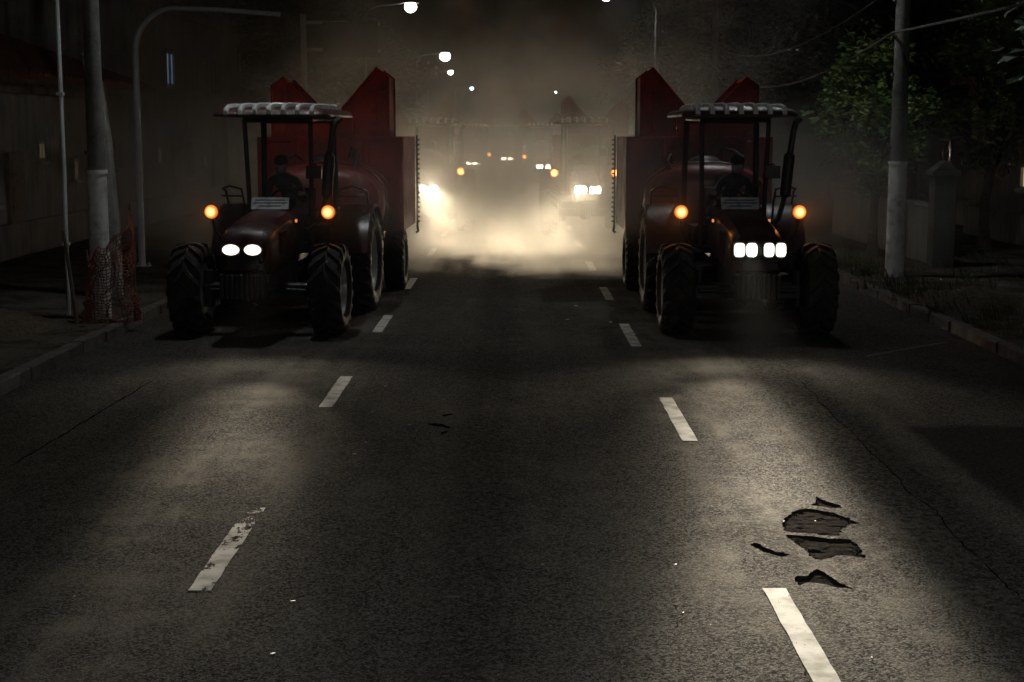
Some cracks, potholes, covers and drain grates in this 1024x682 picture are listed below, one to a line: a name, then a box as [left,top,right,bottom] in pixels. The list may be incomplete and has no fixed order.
pothole [750,543,790,557]
crack [8,381,152,467]
pothole [795,569,853,589]
pothole [782,508,866,560]
crack [798,378,1022,600]
pothole [811,496,842,508]
